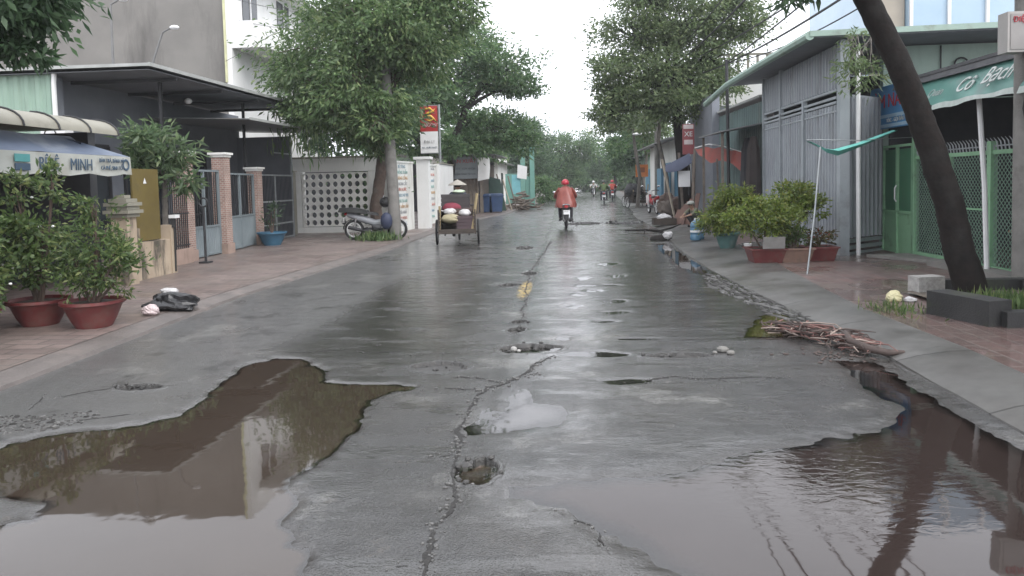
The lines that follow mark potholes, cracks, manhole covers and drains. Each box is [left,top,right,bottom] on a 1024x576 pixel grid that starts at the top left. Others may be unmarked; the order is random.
pothole [110,382,168,392]
crack [385,352,556,576]
pothole [446,454,504,490]
crack [28,384,175,411]
crack [619,375,792,385]
pothole [492,341,570,354]
